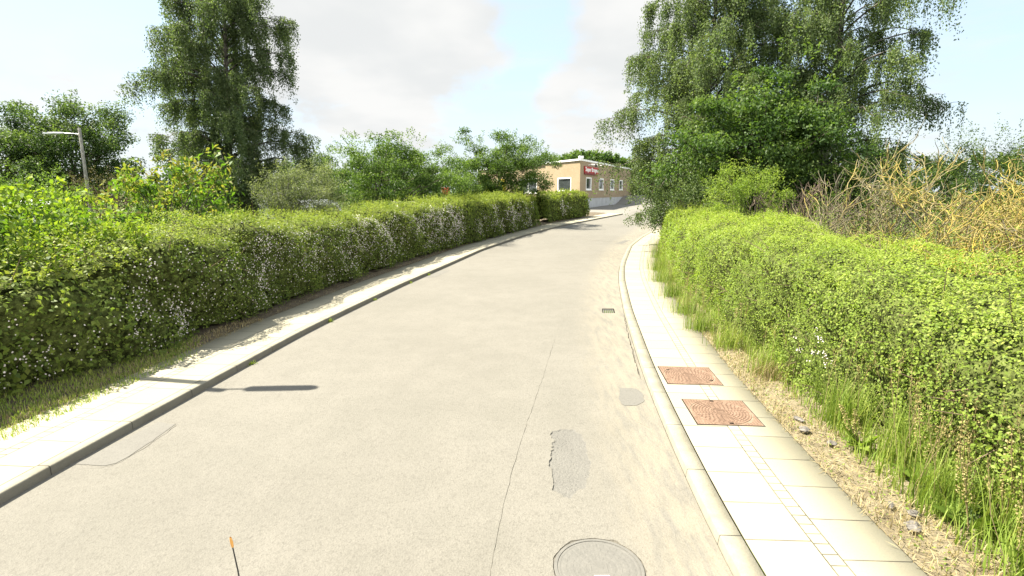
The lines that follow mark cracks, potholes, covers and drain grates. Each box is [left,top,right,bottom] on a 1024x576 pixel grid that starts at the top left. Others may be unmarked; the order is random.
crack [490,337,556,576]
manhole cover [553,538,647,576]
manhole cover [657,366,724,386]
manhole cover [681,399,766,427]
